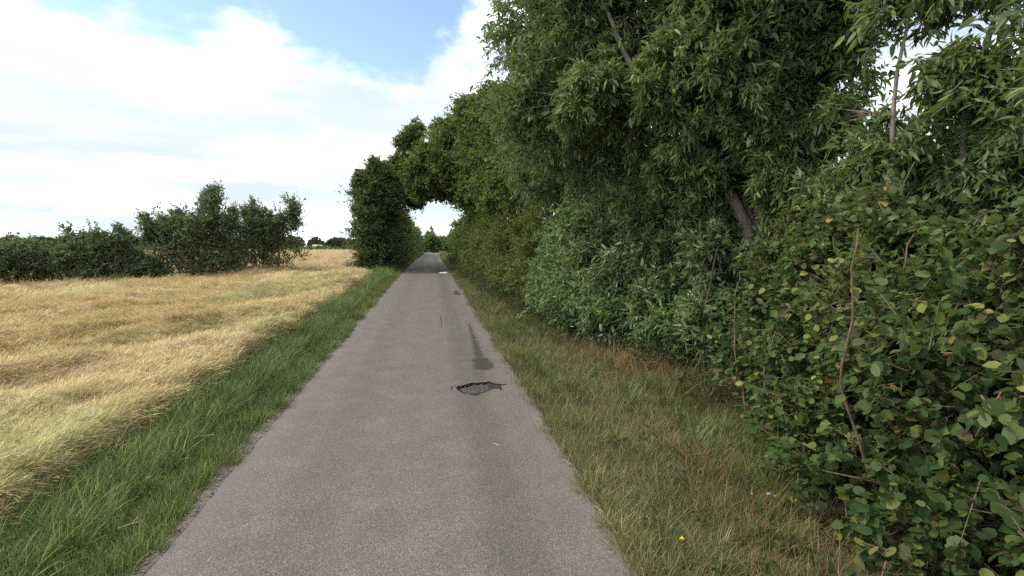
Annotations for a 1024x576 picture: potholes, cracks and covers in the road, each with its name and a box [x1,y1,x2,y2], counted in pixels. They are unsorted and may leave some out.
pothole [451,381,507,396]
